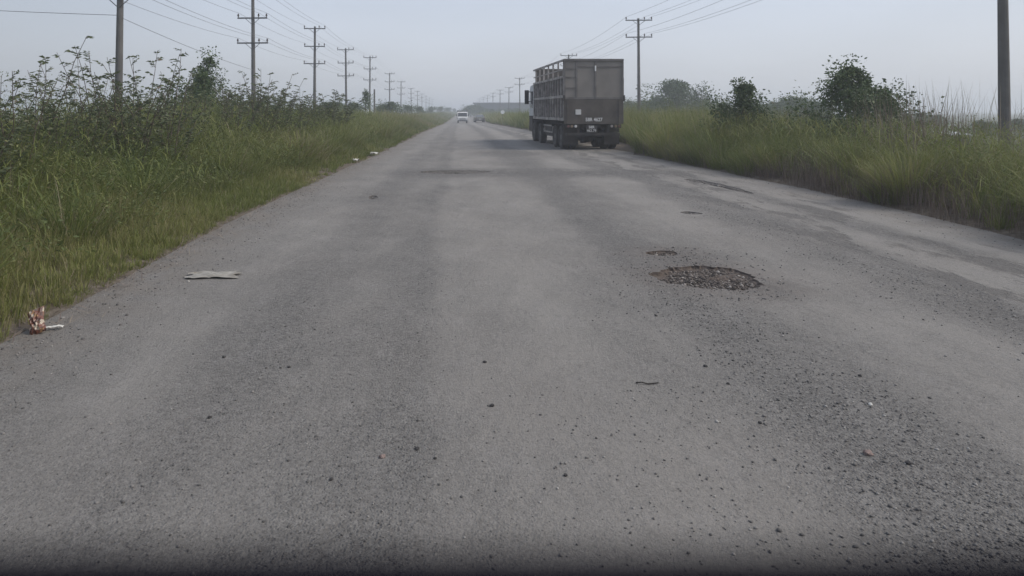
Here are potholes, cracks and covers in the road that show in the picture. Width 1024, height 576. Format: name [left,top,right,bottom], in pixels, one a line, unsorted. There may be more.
pothole [648,265,763,291]
